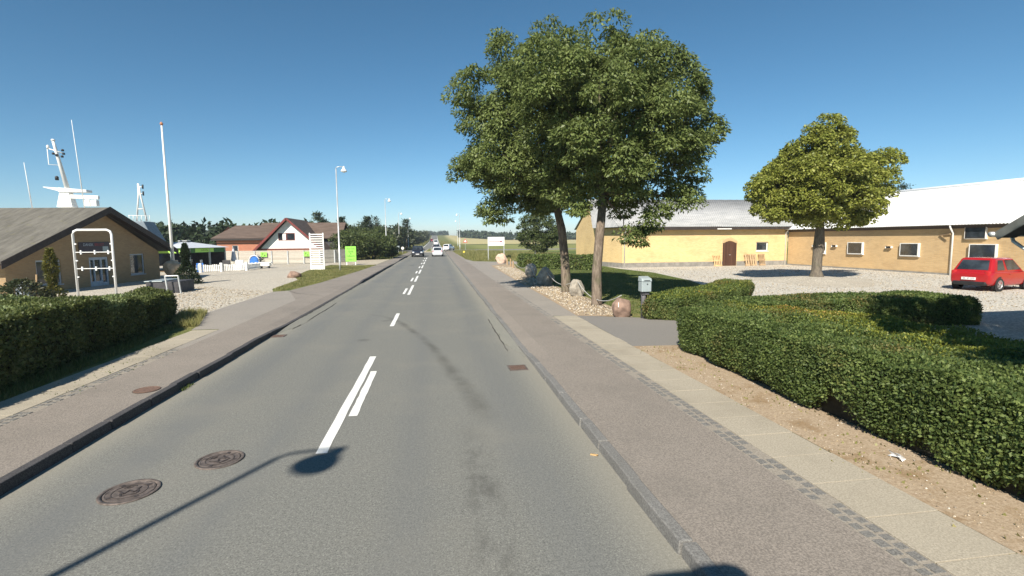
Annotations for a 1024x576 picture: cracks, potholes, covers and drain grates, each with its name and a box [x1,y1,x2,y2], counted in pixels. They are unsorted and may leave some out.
manhole cover [96,479,161,506]
manhole cover [194,450,245,470]
